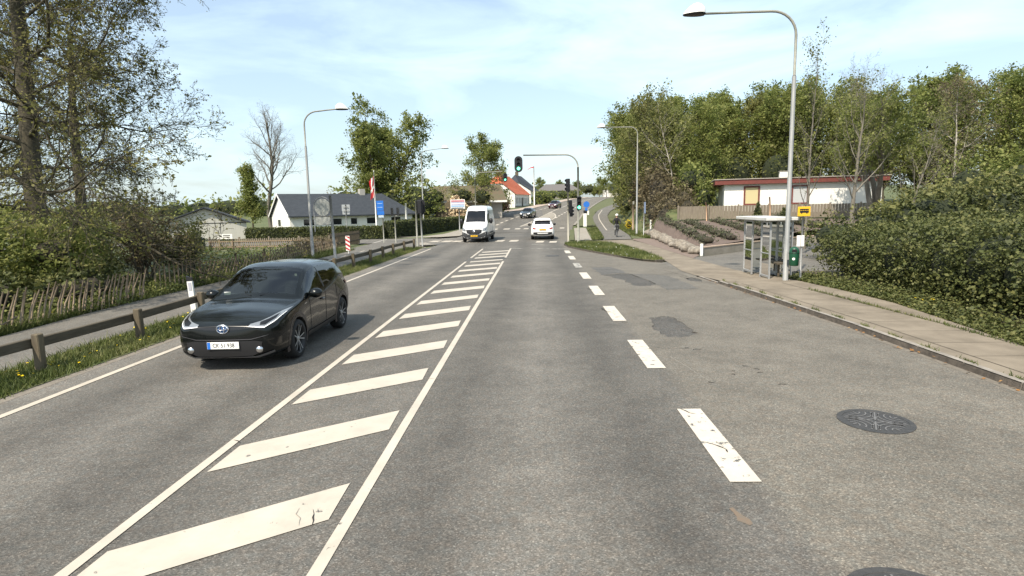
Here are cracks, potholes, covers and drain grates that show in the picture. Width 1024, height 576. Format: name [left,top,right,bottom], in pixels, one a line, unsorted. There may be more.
manhole cover [847,567,927,576]
manhole cover [836,409,917,434]
